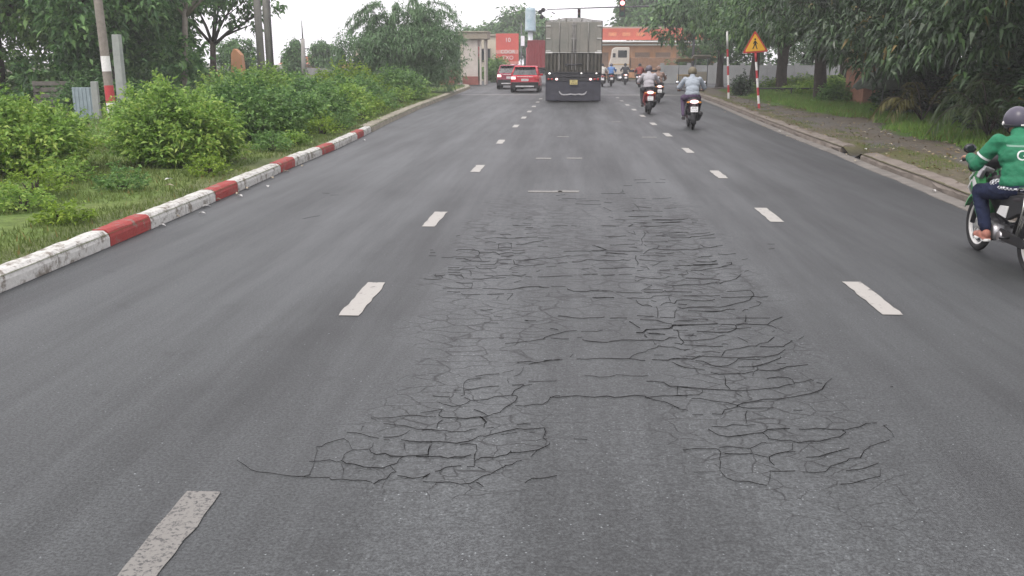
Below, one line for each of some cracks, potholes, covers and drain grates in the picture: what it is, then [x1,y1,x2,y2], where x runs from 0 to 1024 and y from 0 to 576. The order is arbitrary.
crack [237,179,893,487]
